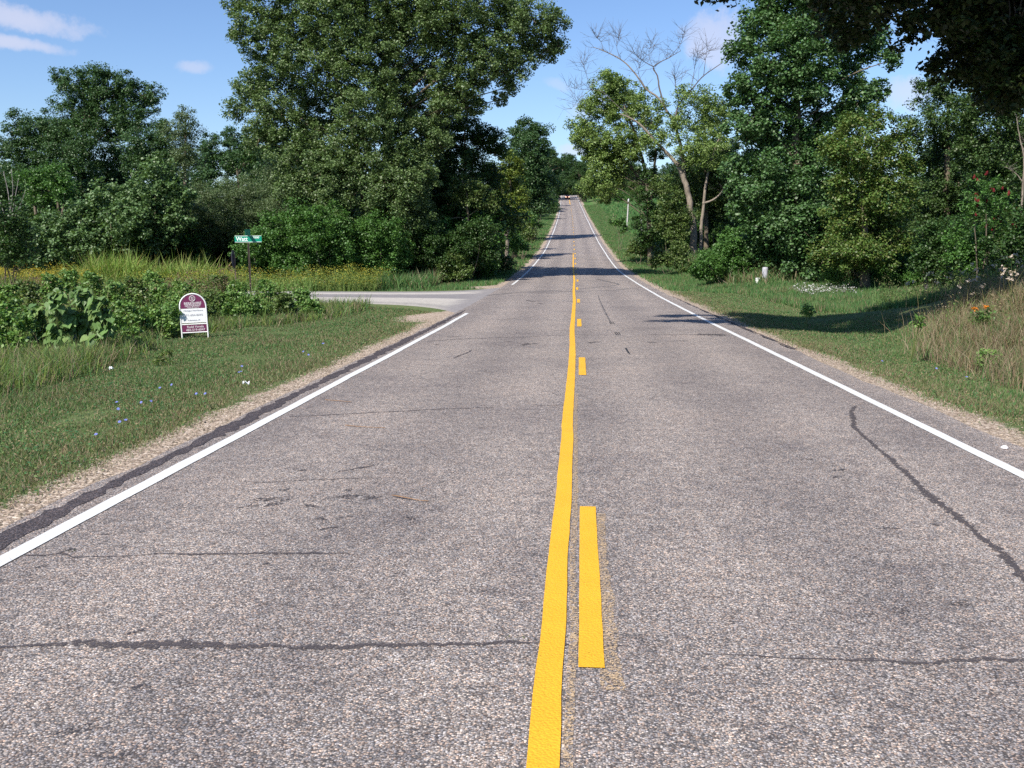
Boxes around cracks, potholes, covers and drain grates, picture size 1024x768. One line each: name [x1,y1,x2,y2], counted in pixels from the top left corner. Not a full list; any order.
crack [698,653,1024,664]
